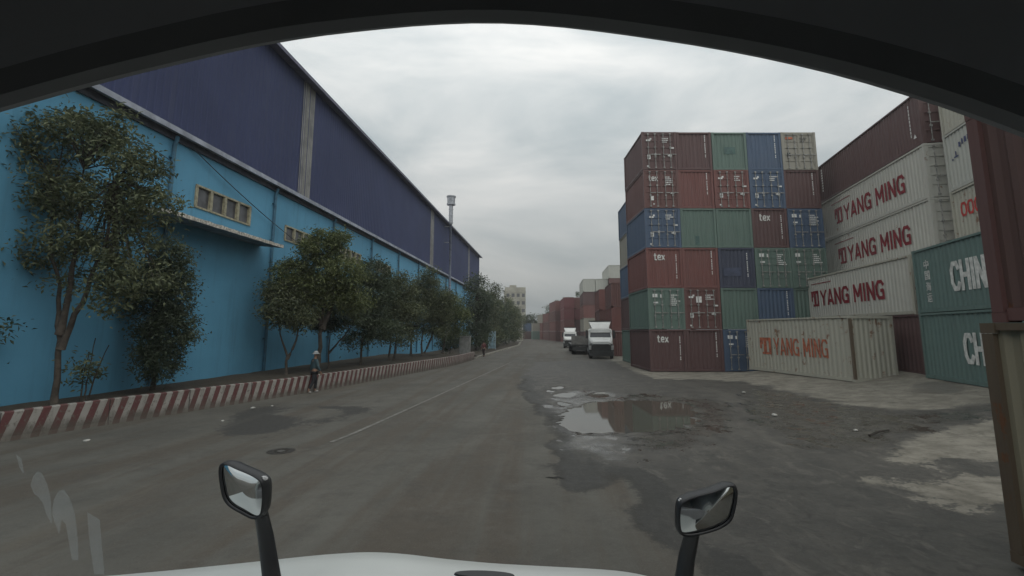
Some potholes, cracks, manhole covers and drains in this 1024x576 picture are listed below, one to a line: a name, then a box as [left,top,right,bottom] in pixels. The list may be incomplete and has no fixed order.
pothole [545,391,585,399]
pothole [545,398,714,436]
pothole [580,391,617,399]
